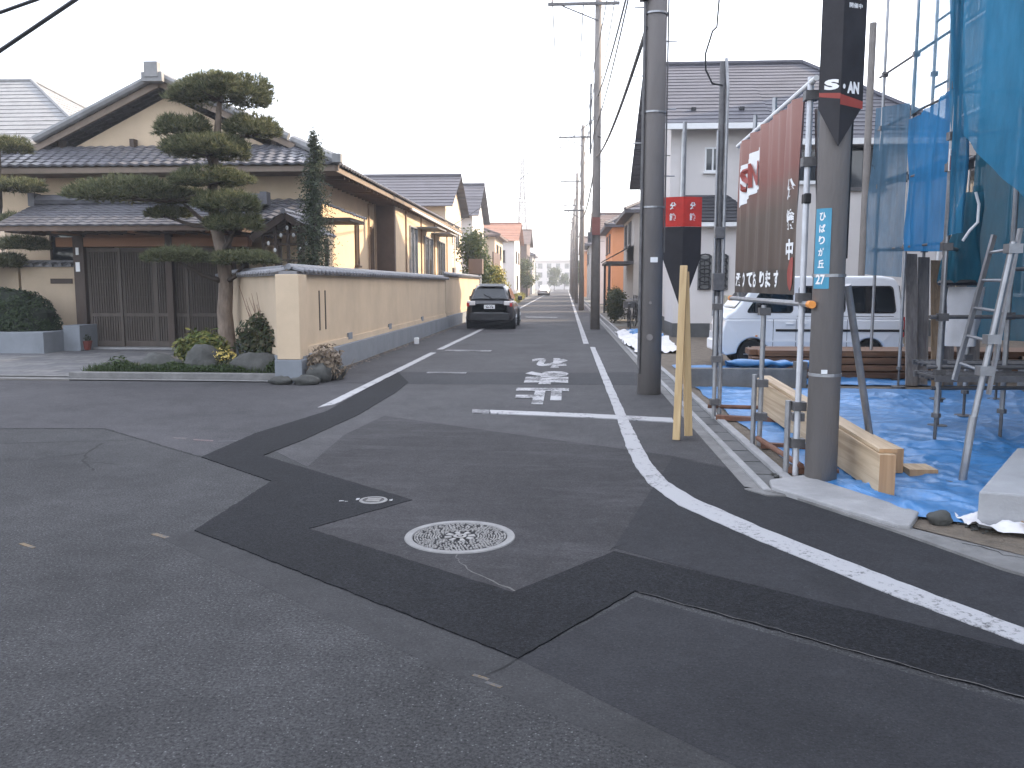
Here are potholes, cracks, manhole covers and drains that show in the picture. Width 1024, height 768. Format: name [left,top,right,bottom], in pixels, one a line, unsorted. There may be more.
crack [455,555,516,591]
utility cover [339,496,393,504]
manhole cover [404,521,515,554]
crack [0,440,121,471]
